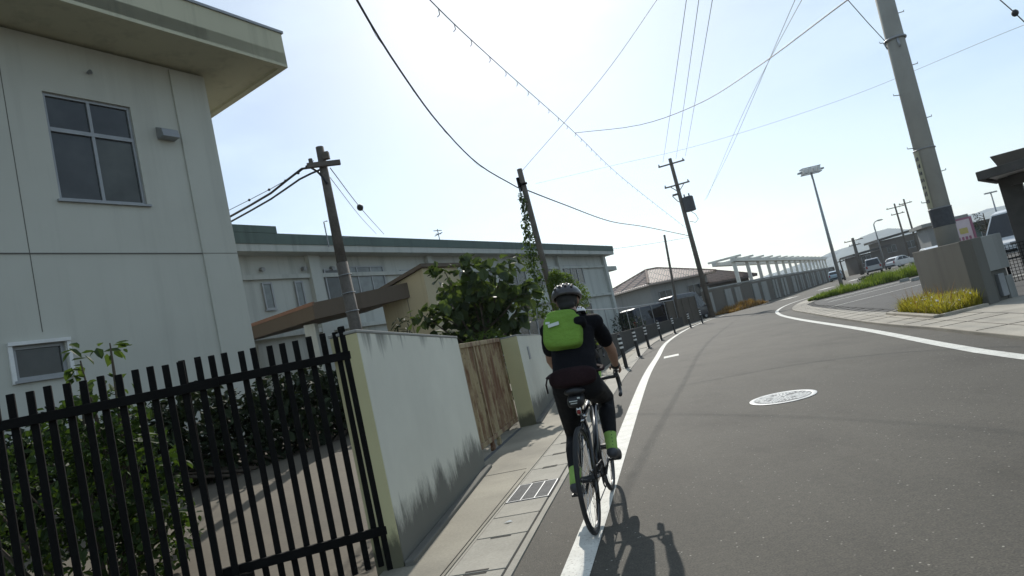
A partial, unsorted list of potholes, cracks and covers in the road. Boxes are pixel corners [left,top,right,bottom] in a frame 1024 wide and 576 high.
manhole cover [750,389,817,406]
drain grate [504,478,560,505]
